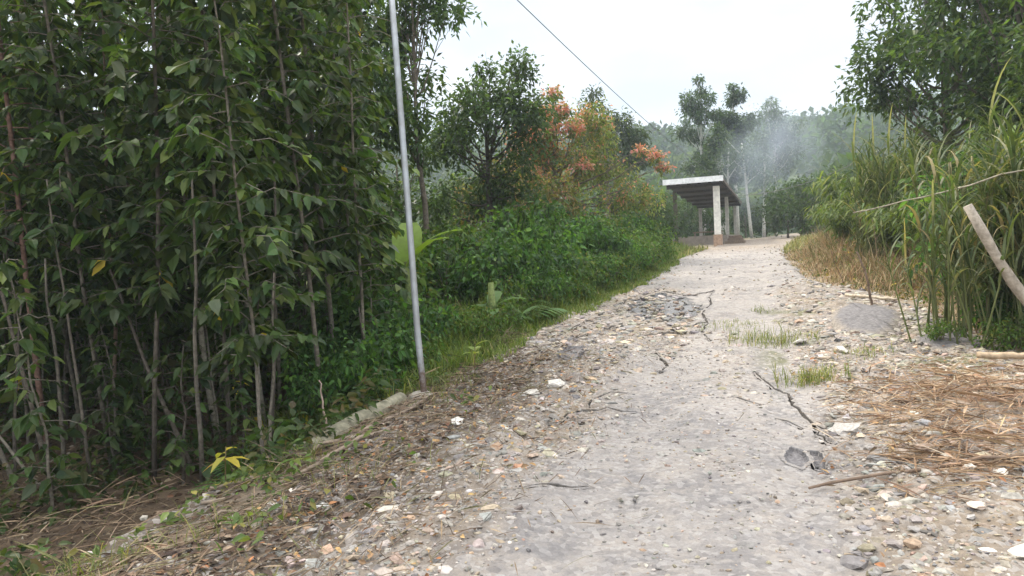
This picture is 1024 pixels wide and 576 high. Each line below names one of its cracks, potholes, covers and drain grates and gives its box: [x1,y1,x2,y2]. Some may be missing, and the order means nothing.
pothole [779,445,814,470]
pothole [621,292,707,323]
crack [516,290,716,374]
pothole [809,450,828,472]
crack [734,372,831,445]
